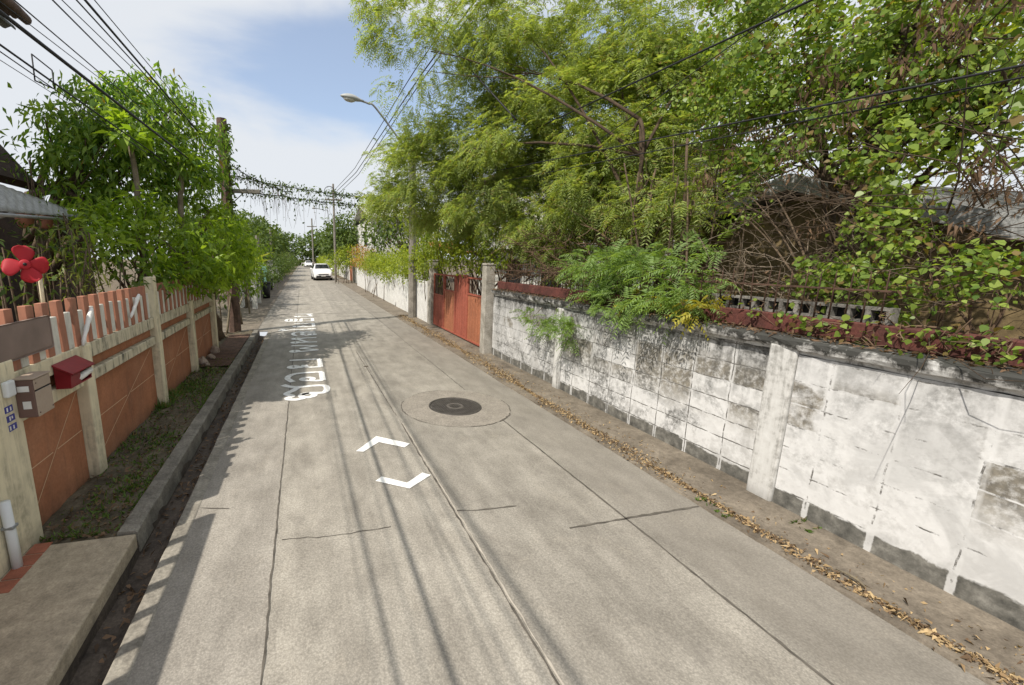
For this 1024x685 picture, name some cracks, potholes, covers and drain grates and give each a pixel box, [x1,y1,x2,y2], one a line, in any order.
manhole cover [402,390,510,427]
